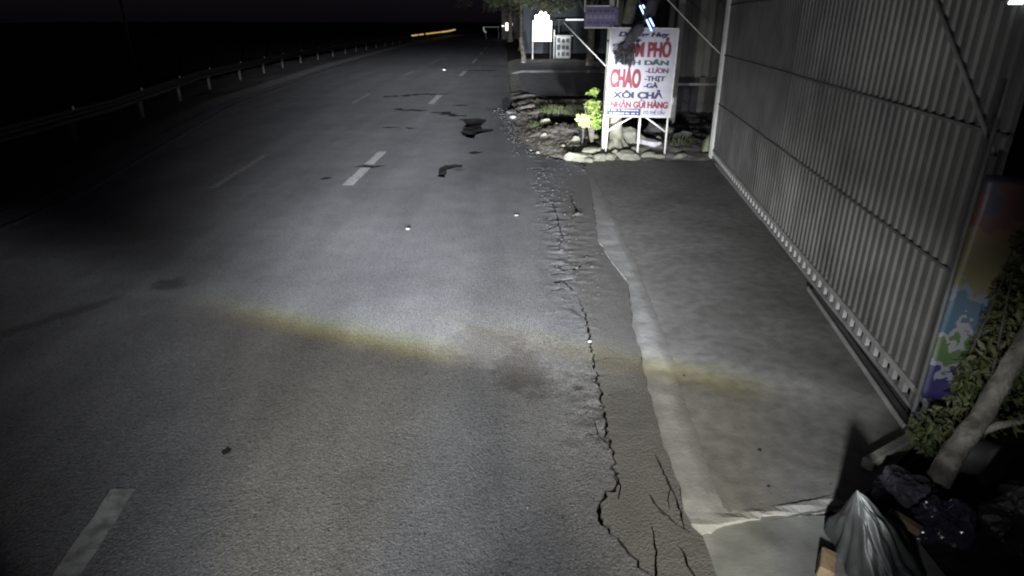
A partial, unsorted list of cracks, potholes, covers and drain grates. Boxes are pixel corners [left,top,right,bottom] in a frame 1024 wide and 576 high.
crack [537,191,695,576]
pothole [459,118,494,138]
pothole [438,164,462,177]
